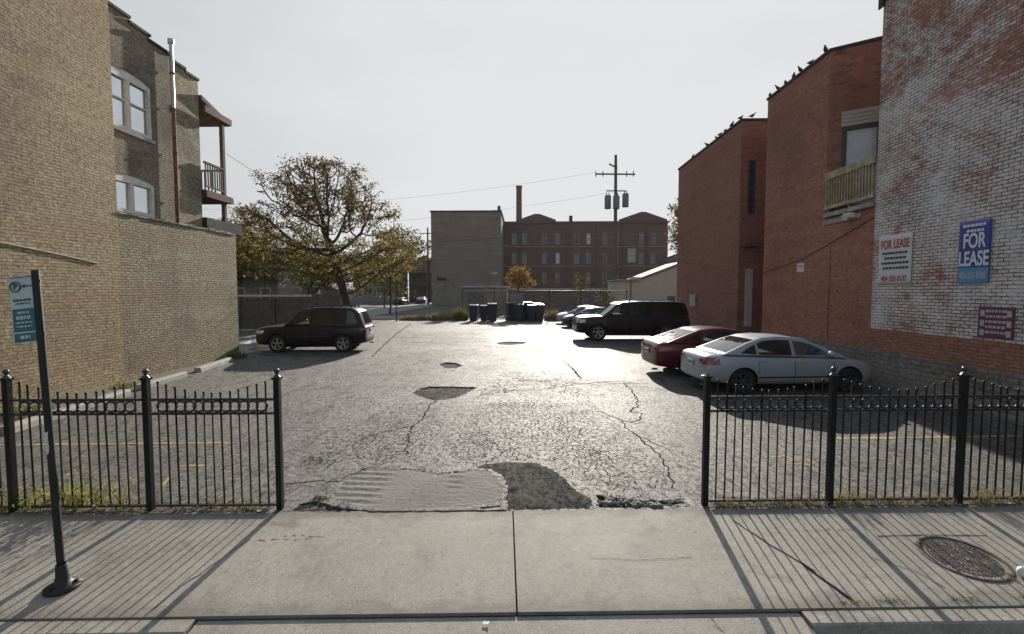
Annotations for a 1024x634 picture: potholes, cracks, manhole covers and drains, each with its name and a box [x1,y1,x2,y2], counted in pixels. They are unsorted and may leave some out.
crack [285,400,449,484]
crack [372,324,458,357]
crack [732,520,852,600]
manhole cover [914,535,1016,583]
pothole [413,386,477,400]
pothole [596,495,685,508]
crack [433,360,723,491]
